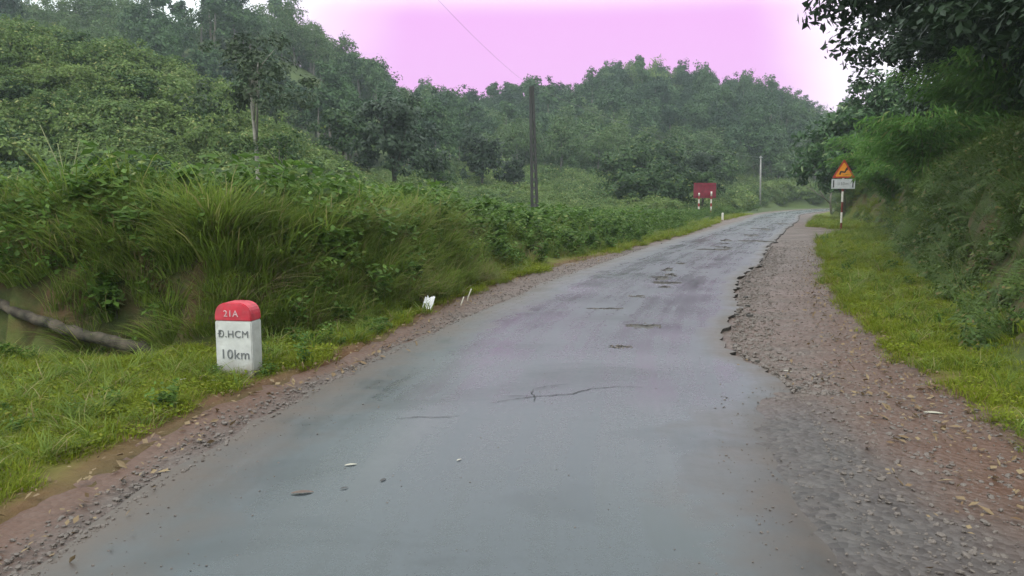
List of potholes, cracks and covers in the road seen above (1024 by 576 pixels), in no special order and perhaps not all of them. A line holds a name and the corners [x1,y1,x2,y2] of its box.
crack [492,384,634,403]
